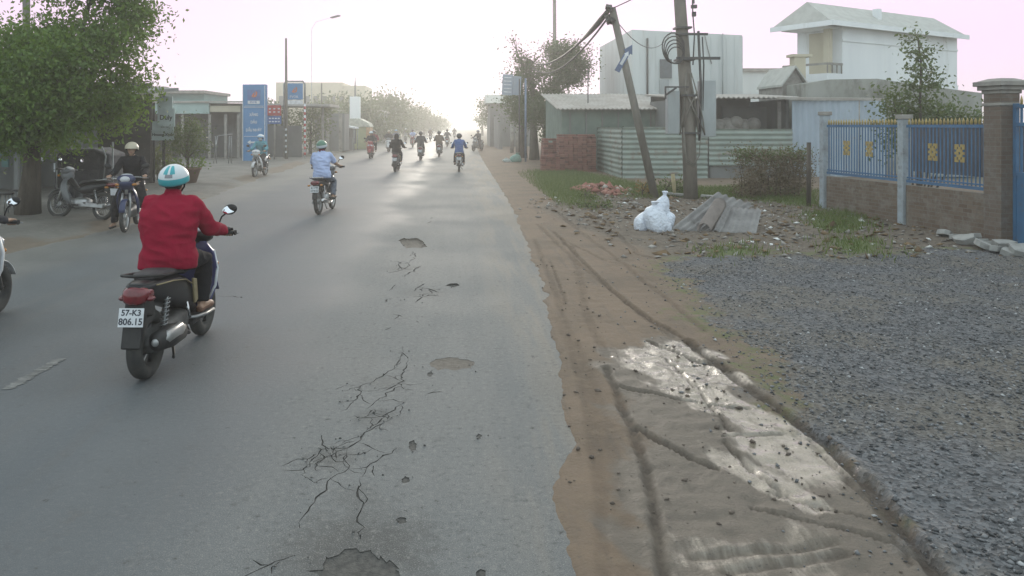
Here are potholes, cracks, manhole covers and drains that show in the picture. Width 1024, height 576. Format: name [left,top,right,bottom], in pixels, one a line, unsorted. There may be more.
pothole [399,238,427,248]
pothole [430,357,475,371]
crack [385,254,439,330]
crack [282,349,414,539]
pothole [310,548,400,576]
